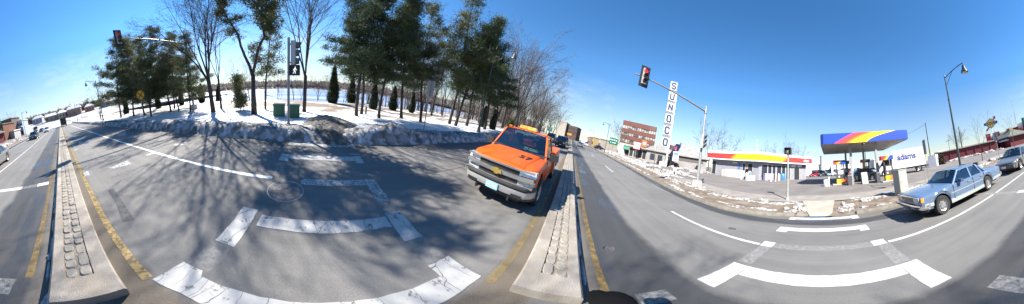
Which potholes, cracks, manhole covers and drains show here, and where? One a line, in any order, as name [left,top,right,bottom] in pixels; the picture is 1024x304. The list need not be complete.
manhole cover [267,181,304,202]
